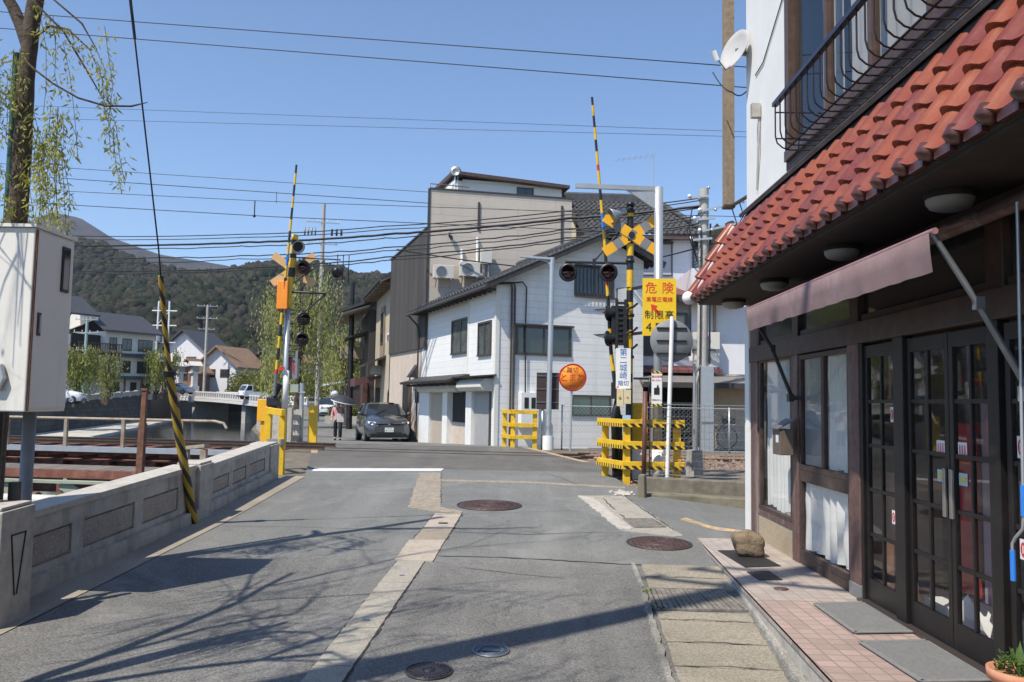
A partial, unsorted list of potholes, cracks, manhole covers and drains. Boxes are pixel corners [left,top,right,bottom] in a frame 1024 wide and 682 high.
manhole cover [405,662,453,680]
manhole cover [457,500,522,511]
manhole cover [473,643,510,657]
drain grate [623,518,666,528]
manhole cover [626,536,693,550]
drain grate [646,587,749,612]
